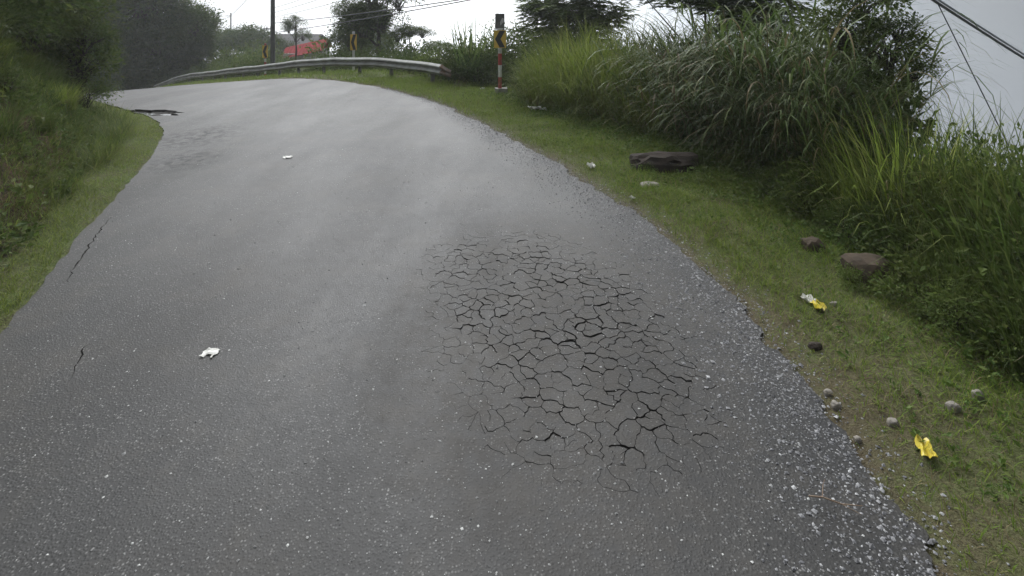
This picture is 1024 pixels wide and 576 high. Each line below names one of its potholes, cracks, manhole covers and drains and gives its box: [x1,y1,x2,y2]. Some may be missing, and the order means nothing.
crack [66,219,109,281]
crack [416,232,725,498]
